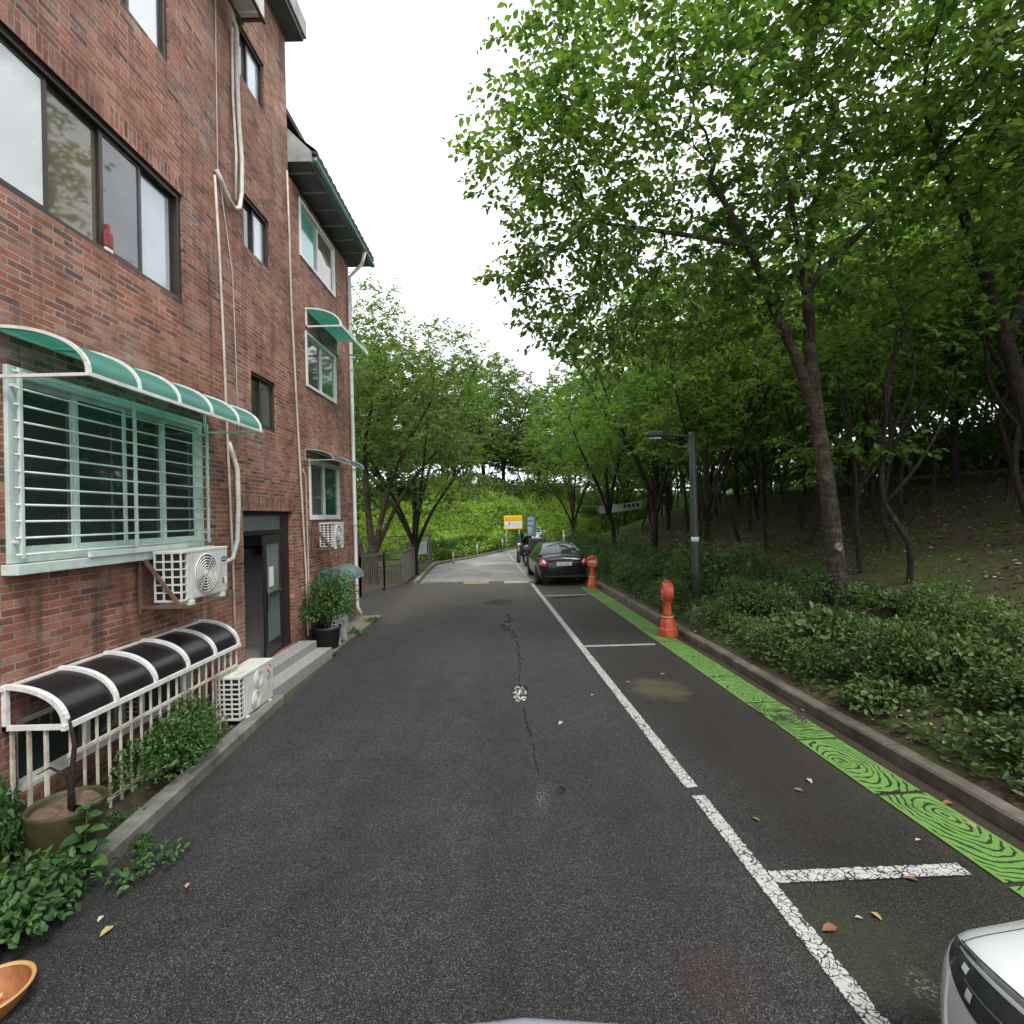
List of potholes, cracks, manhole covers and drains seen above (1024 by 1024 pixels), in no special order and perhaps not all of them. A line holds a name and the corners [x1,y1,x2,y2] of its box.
crack [502,614,524,681]
